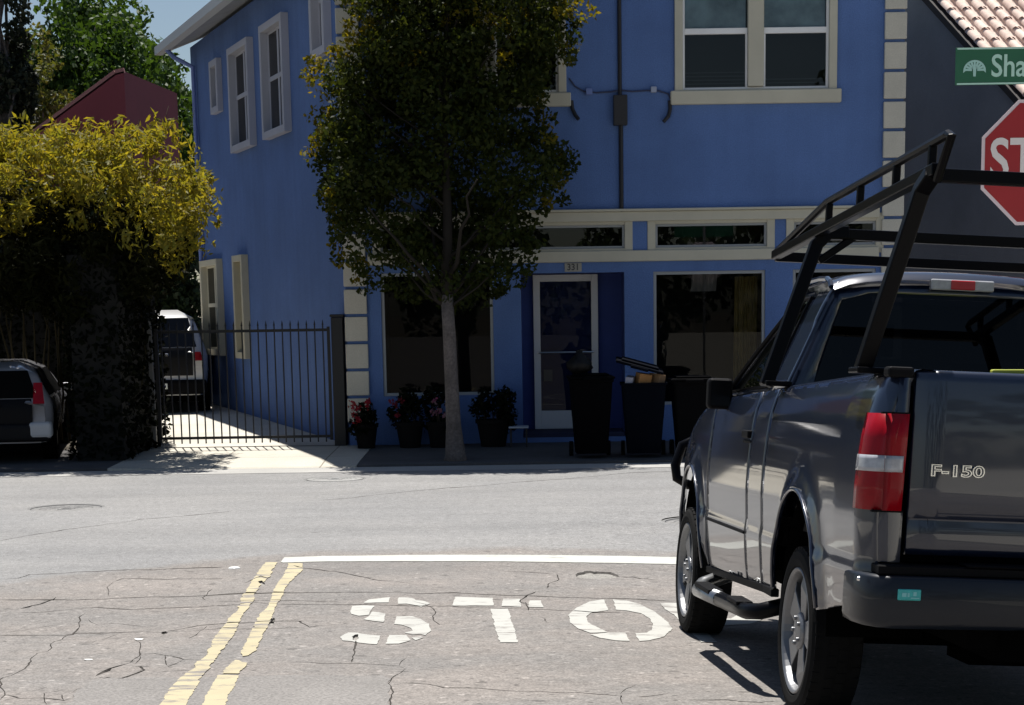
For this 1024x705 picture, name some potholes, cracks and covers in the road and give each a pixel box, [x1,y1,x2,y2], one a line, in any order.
crack [311,642,774,705]
